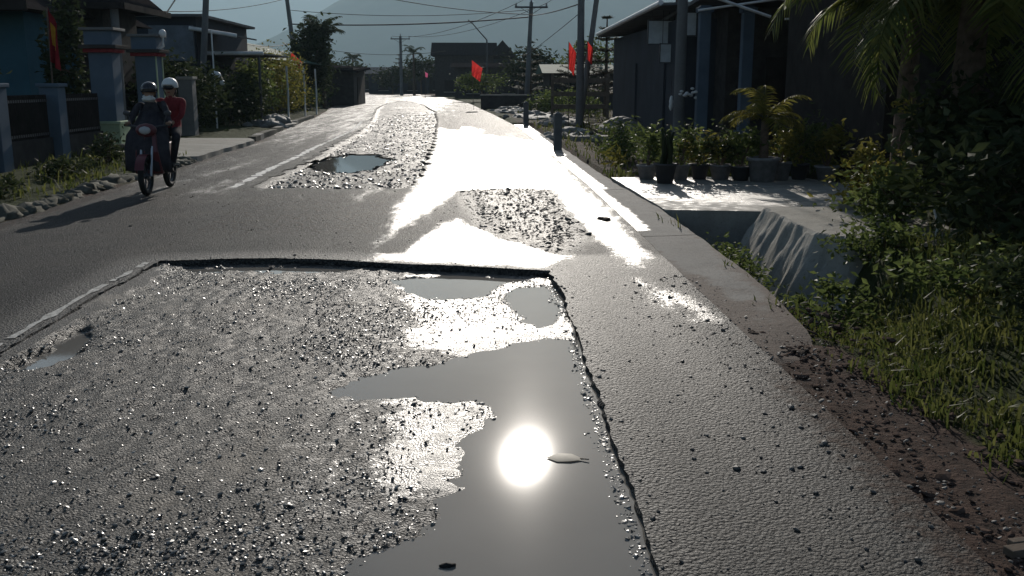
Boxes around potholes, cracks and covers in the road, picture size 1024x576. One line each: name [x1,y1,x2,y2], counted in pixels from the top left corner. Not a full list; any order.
pothole [253,101,439,189]
pothole [0,258,659,576]
